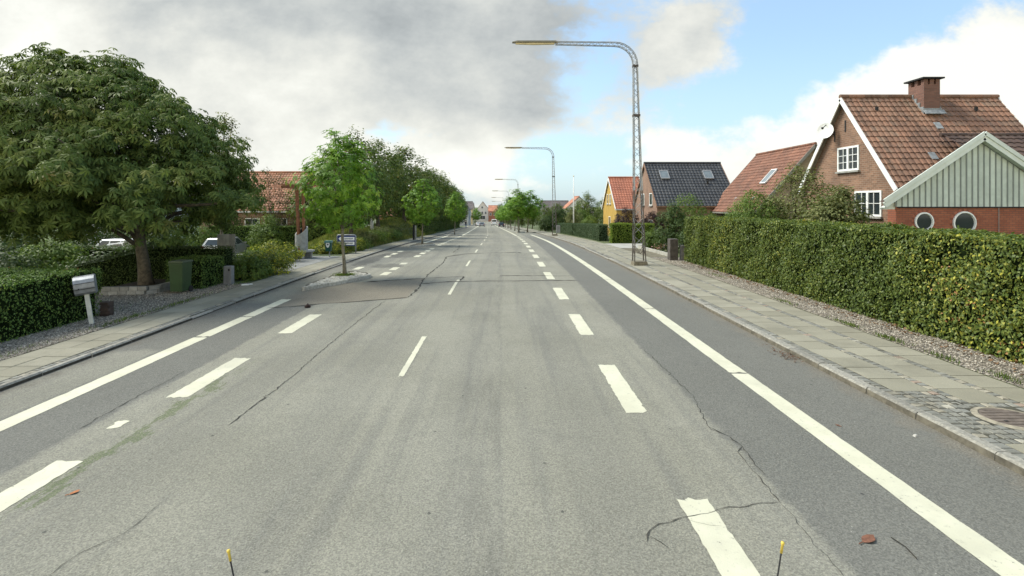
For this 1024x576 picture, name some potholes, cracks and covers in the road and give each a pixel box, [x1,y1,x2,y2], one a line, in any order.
crack [230,302,383,424]
crack [645,351,780,548]
crack [422,249,574,284]
manhole cover [970,407,1024,431]
